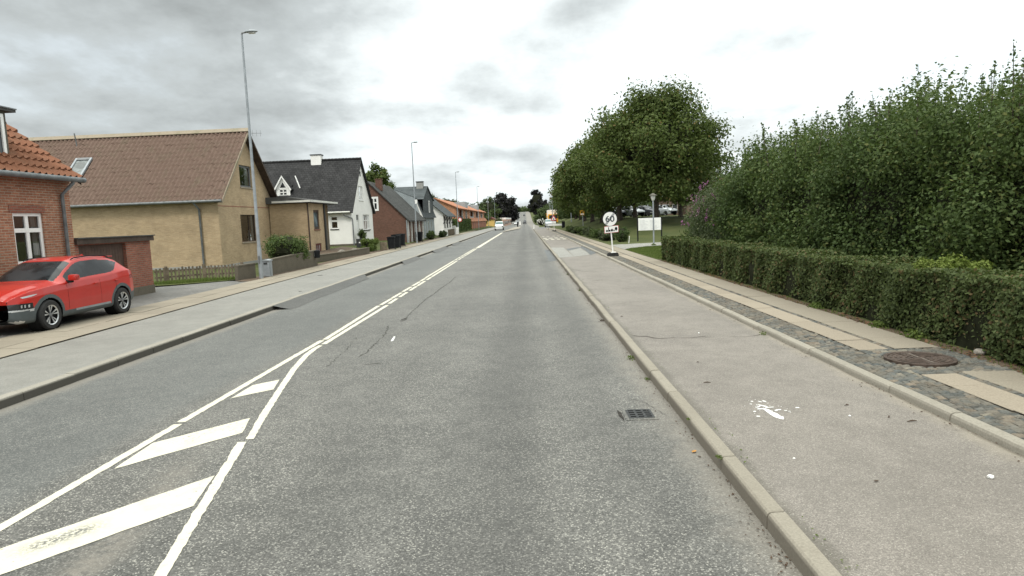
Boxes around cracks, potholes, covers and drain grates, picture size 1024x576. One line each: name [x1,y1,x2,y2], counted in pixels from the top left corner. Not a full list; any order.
crack [326,278,454,367]
manhole cover [883,351,958,368]
